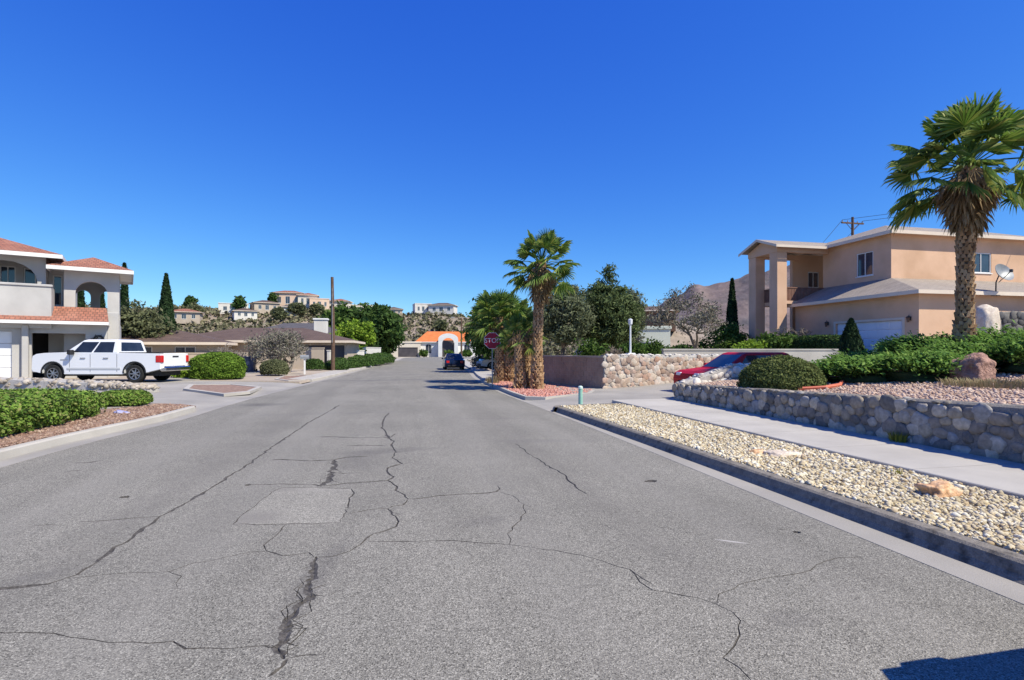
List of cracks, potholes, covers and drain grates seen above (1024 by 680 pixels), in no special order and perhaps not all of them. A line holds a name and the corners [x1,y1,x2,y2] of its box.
crack [0,413,857,680]
